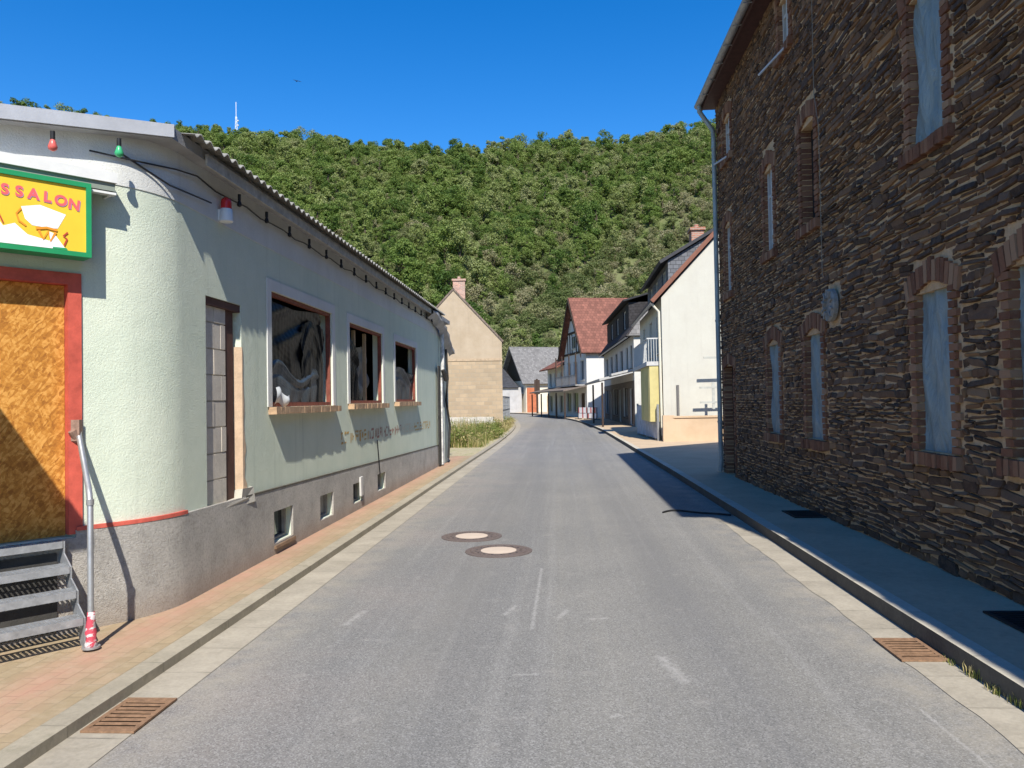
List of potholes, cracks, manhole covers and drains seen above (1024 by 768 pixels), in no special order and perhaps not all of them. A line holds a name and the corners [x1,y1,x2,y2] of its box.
manhole cover [465,544,532,558]
manhole cover [441,531,502,542]
drain grate [873,638,948,662]
drain grate [80,697,177,734]
